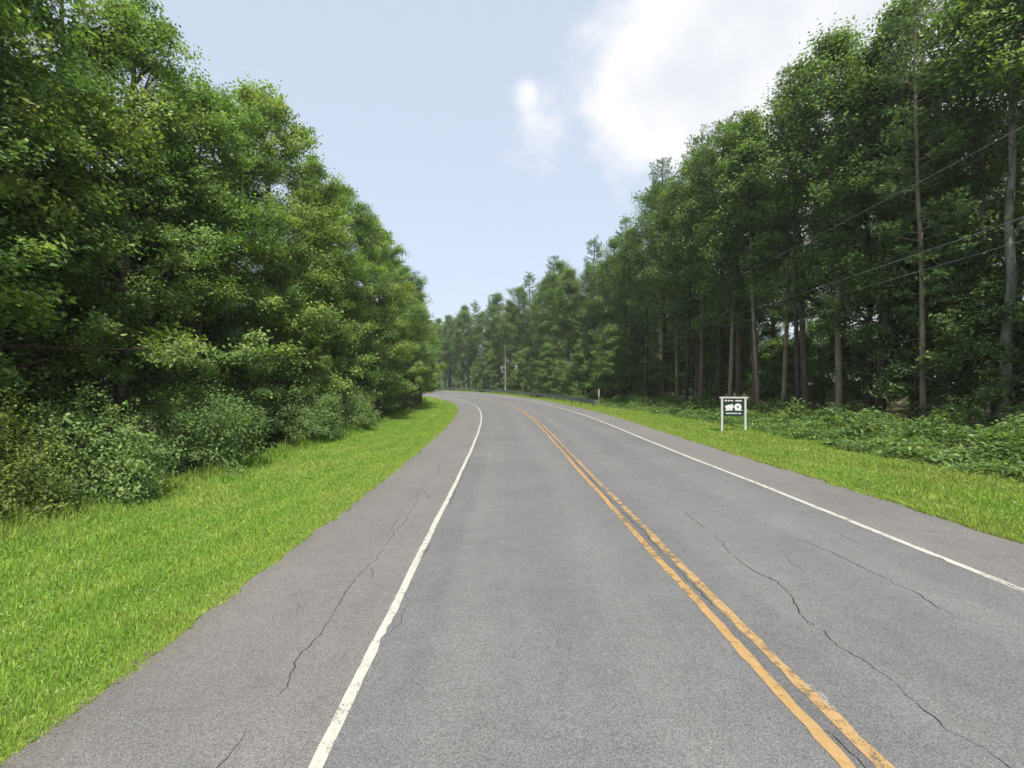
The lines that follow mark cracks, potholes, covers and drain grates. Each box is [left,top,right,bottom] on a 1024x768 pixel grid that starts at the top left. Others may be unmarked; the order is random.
crack [217,455,472,768]
crack [682,510,1010,768]
